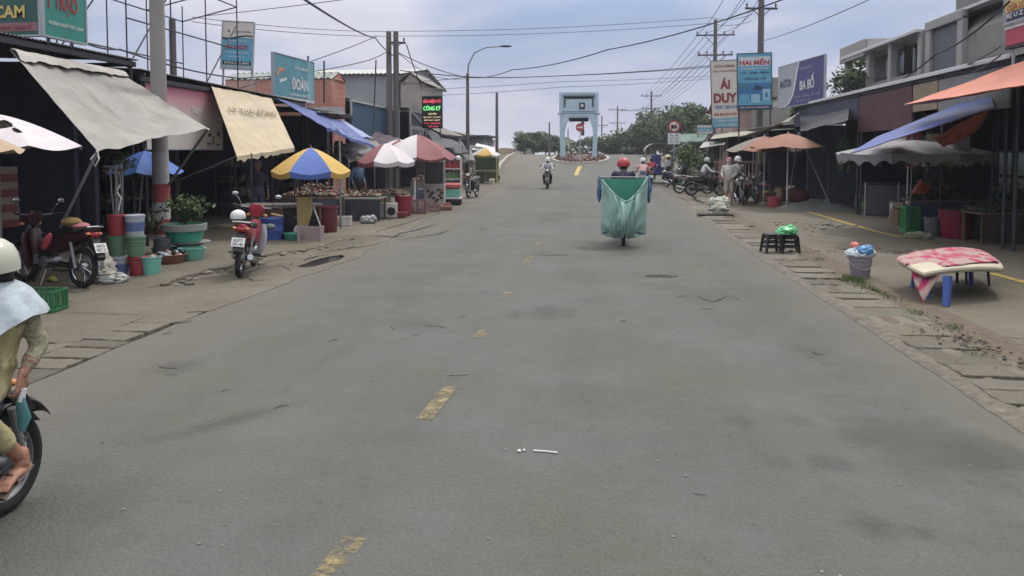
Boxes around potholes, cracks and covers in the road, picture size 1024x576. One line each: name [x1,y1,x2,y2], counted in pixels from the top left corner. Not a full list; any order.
pothole [298,255,345,267]
